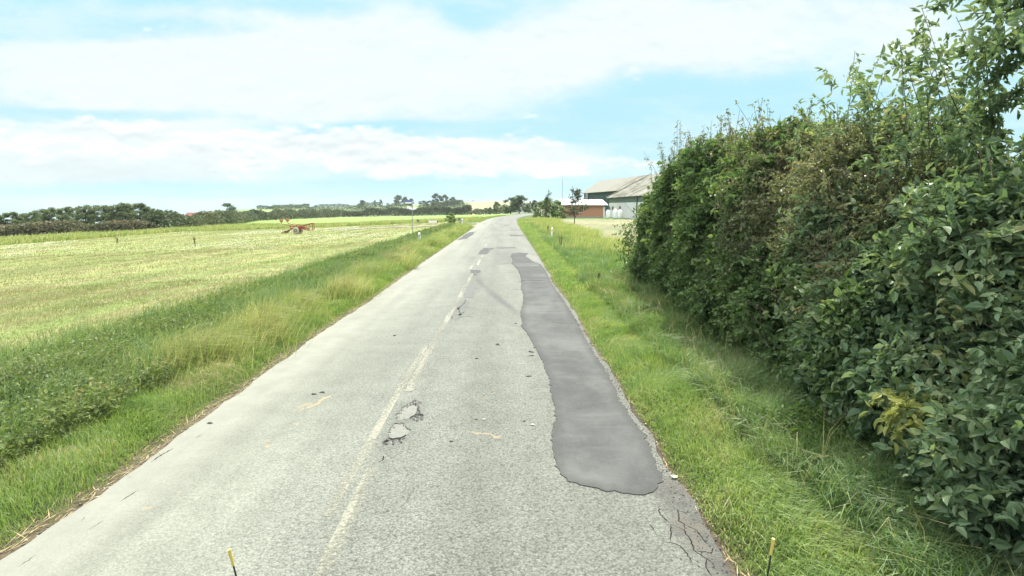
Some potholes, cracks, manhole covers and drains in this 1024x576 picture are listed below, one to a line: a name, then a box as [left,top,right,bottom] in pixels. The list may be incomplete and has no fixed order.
pothole [382,422,411,446]
crack [649,506,718,576]
pothole [396,399,424,422]
